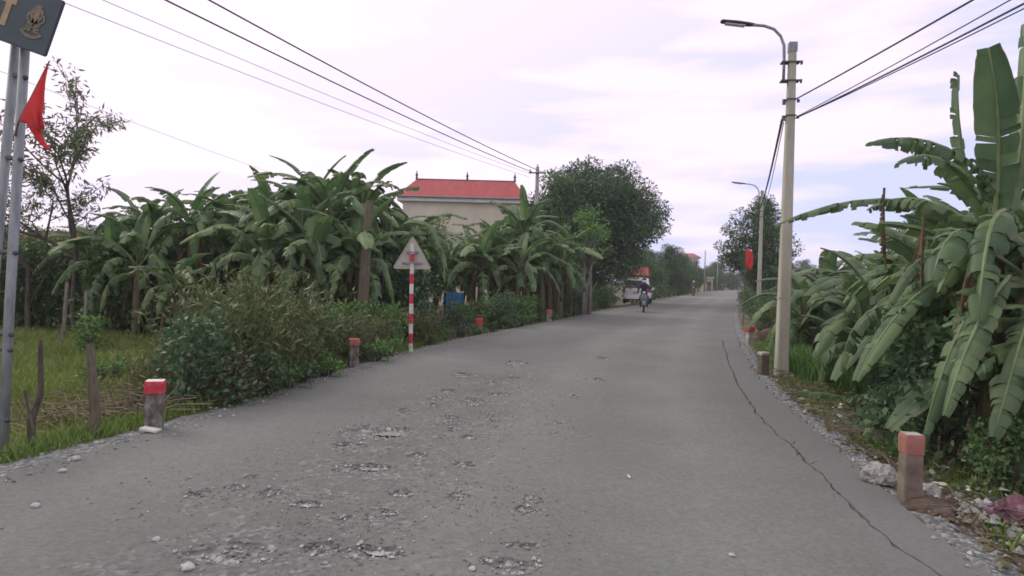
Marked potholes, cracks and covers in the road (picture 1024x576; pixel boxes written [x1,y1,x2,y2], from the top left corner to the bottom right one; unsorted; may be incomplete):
pothole [298,538,342,557]
pothole [500,540,540,549]
pothole [330,461,391,474]
pothole [504,360,529,368]
pothole [460,397,485,407]
pothole [338,422,412,442]
pothole [511,504,538,515]
pothole [445,491,470,500]
pothole [522,495,542,503]
pothole [388,487,414,497]
pothole [252,486,286,497]
pothole [172,539,288,565]
